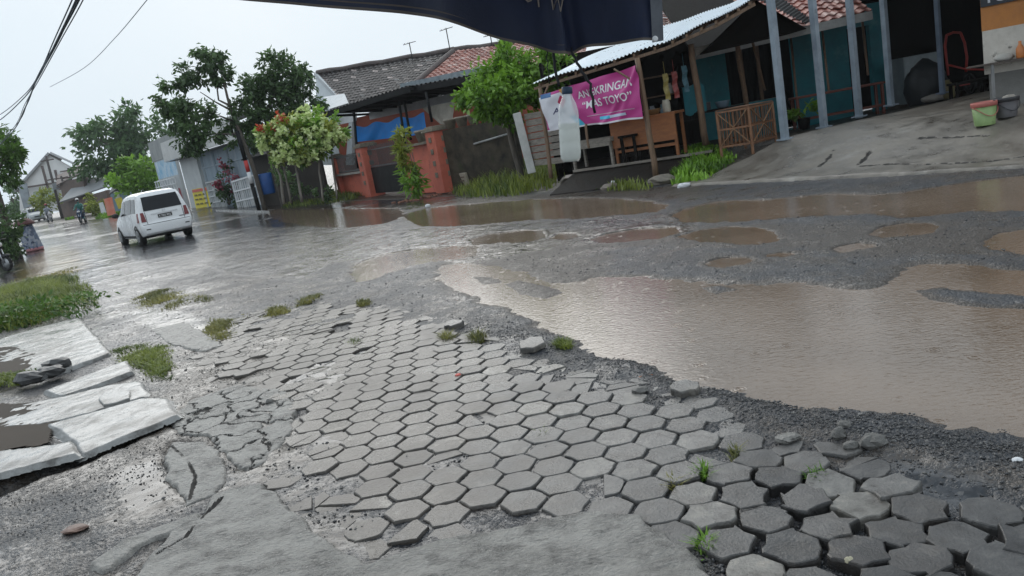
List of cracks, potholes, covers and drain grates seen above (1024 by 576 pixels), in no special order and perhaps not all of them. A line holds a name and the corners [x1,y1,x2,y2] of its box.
pothole [464,228,551,246]
pothole [859,220,949,241]
pothole [667,224,791,246]
pothole [398,196,677,228]
crack [857,151,1024,167]
pothole [580,225,687,244]
crack [155,389,296,555]
pothole [970,227,1024,257]
pothole [416,253,1024,456]
